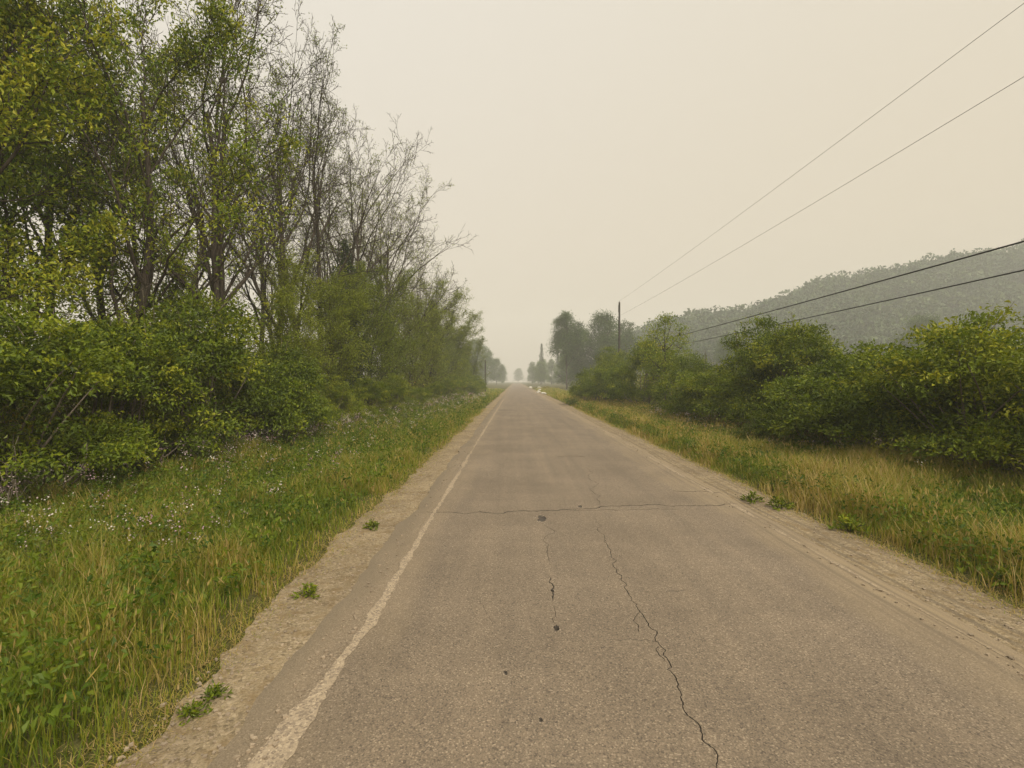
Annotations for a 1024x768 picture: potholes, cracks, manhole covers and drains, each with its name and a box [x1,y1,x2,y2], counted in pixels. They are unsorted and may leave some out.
crack [453,456,738,768]
